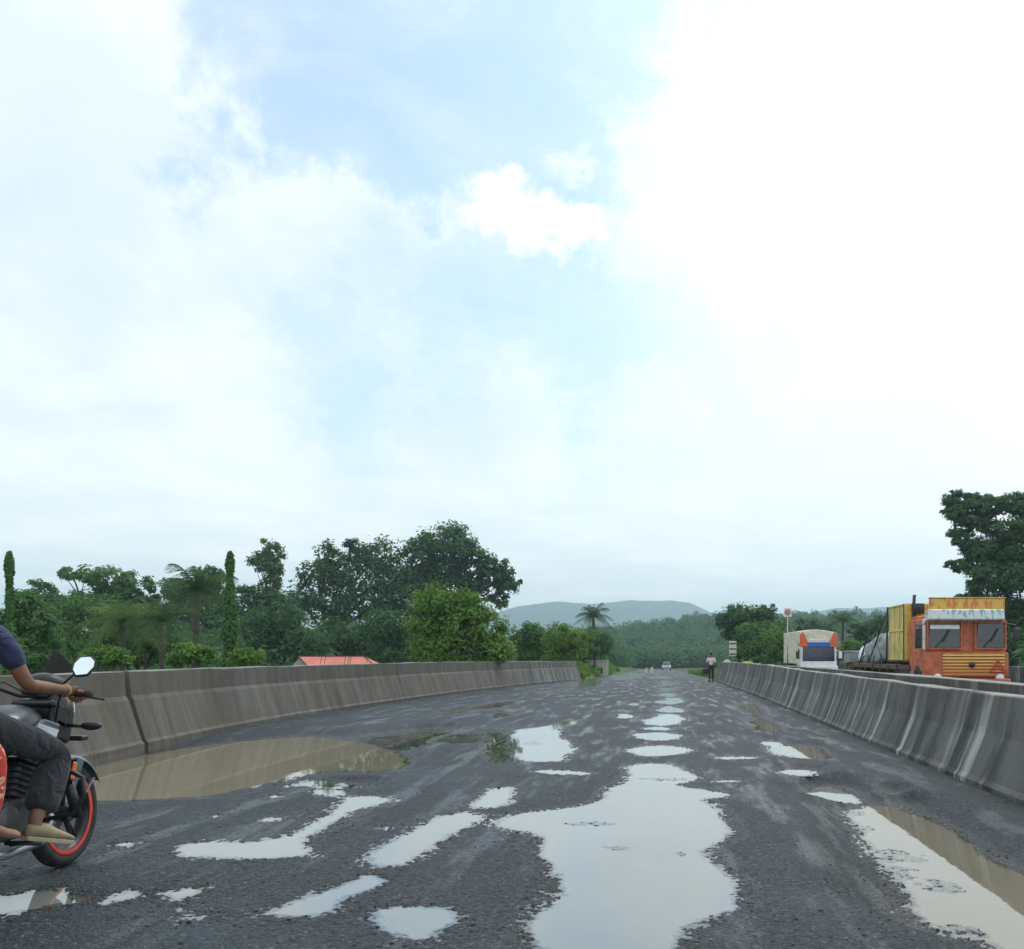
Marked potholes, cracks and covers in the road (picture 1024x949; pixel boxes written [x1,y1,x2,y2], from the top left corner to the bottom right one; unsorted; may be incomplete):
pothole [504,718,589,763]
pothole [346,898,486,949]
pothole [145,880,231,905]
pothole [0,883,104,918]
pothole [757,743,837,759]
pothole [452,785,527,810]
pothole [730,701,790,732]
pothole [224,869,407,923]
pothole [618,744,699,757]
pothole [483,761,765,949]
pothole [832,802,1024,949]
pothole [273,776,382,789]
